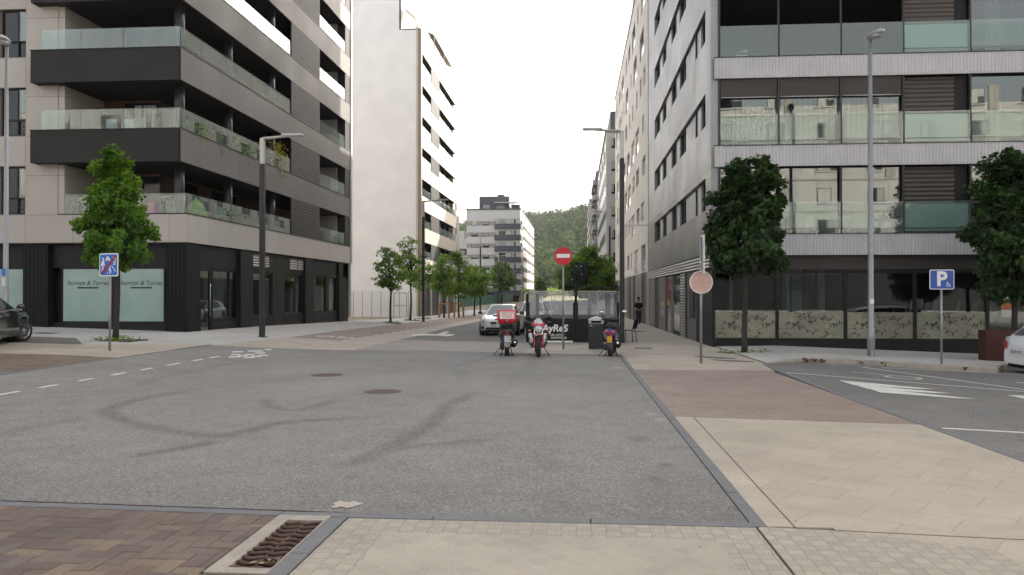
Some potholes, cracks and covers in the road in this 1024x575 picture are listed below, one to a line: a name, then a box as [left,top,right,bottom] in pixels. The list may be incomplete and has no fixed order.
drain grate [203,515,330,575]
